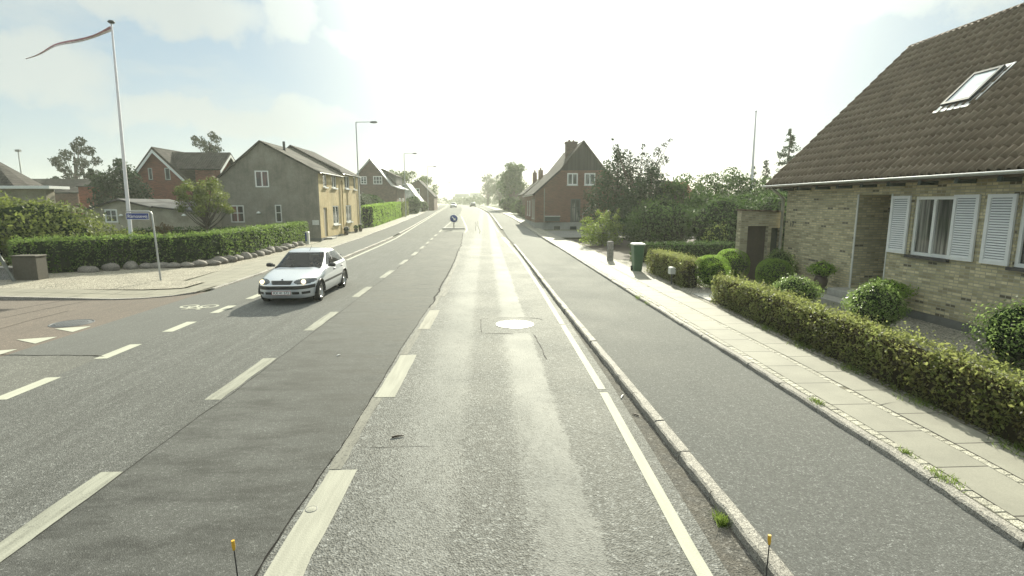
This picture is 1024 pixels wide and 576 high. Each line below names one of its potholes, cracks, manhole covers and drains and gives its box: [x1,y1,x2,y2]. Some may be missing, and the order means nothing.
manhole cover [48,319,95,327]
manhole cover [495,320,534,329]
